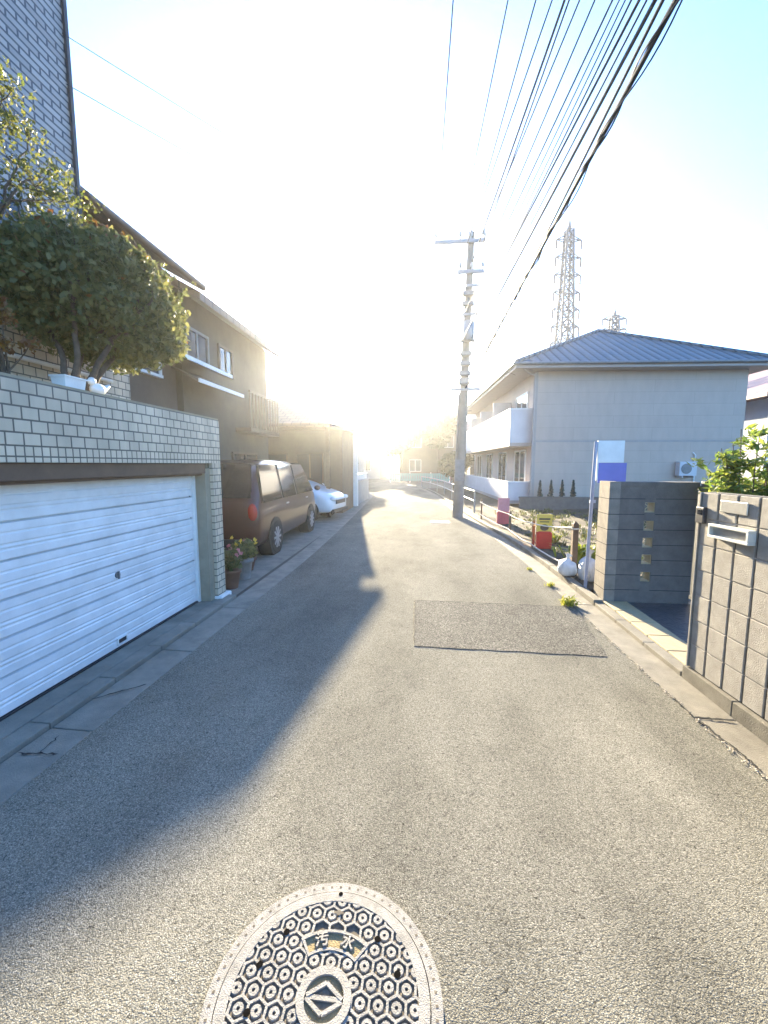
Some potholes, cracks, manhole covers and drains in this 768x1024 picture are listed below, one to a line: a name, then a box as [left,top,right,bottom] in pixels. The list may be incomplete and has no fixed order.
crack [18,735,59,755]
manhole cover [198,883,444,1024]
